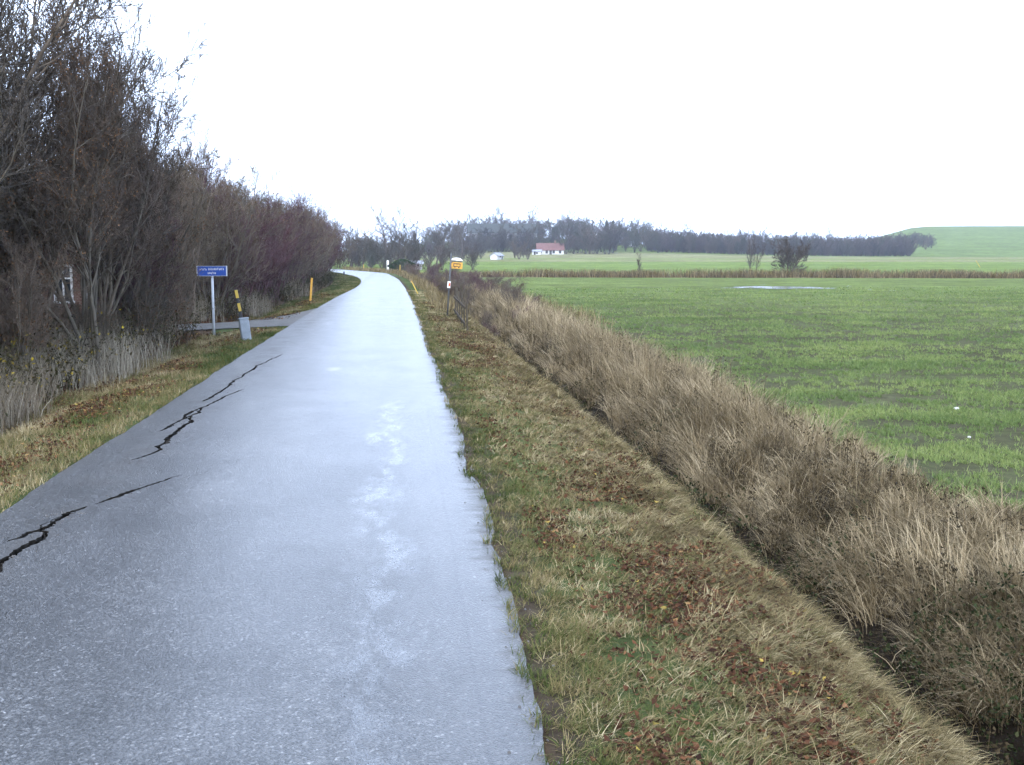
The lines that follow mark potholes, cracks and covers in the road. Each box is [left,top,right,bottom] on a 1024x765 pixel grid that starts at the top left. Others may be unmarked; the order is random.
crack [0,476,177,572]
crack [132,355,281,460]
